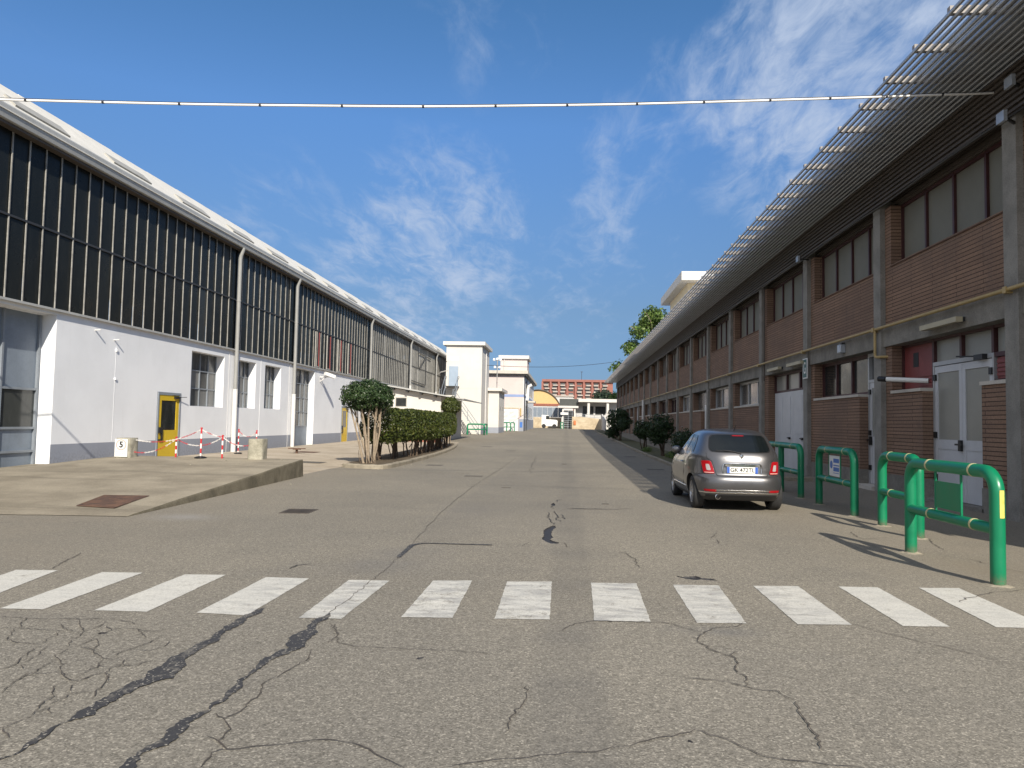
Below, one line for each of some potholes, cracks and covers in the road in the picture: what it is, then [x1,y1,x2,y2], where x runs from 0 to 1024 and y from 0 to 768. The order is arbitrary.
pothole [542,526,559,544]
crack [1,558,491,768]
crack [449,620,860,767]
manhole cover [76,495,149,508]
